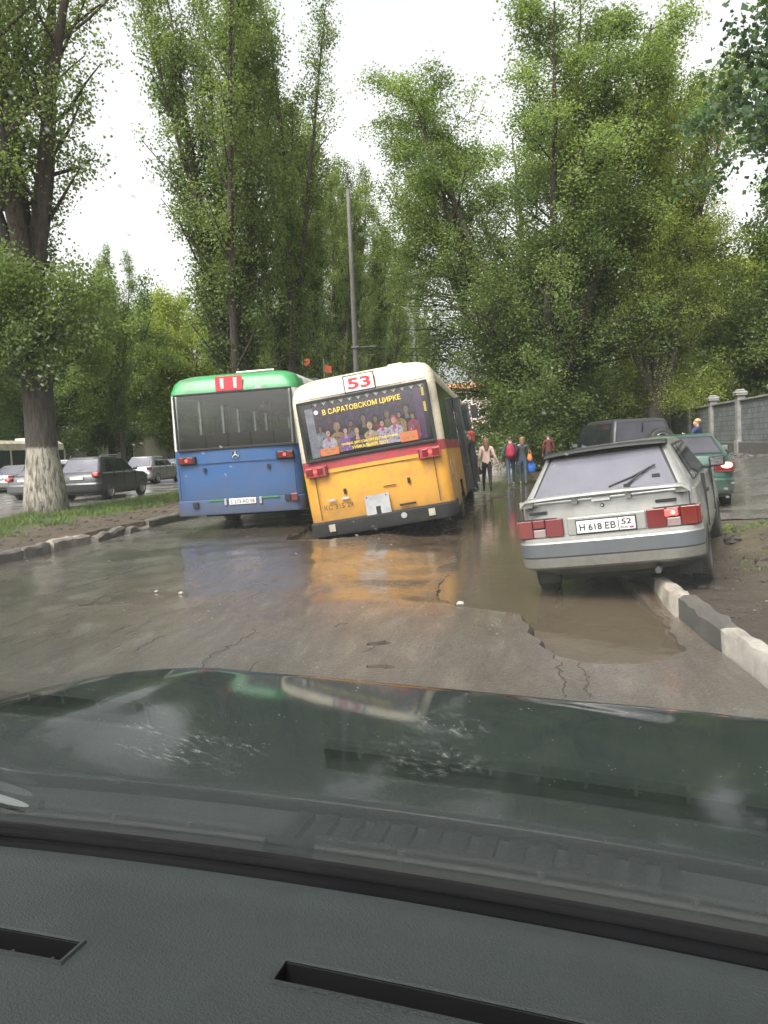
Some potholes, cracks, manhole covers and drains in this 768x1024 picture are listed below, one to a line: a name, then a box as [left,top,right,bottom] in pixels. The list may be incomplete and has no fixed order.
crack [201,629,259,671]
crack [552,650,591,698]
pothole [430,497,696,667]
pothole [361,639,397,647]
